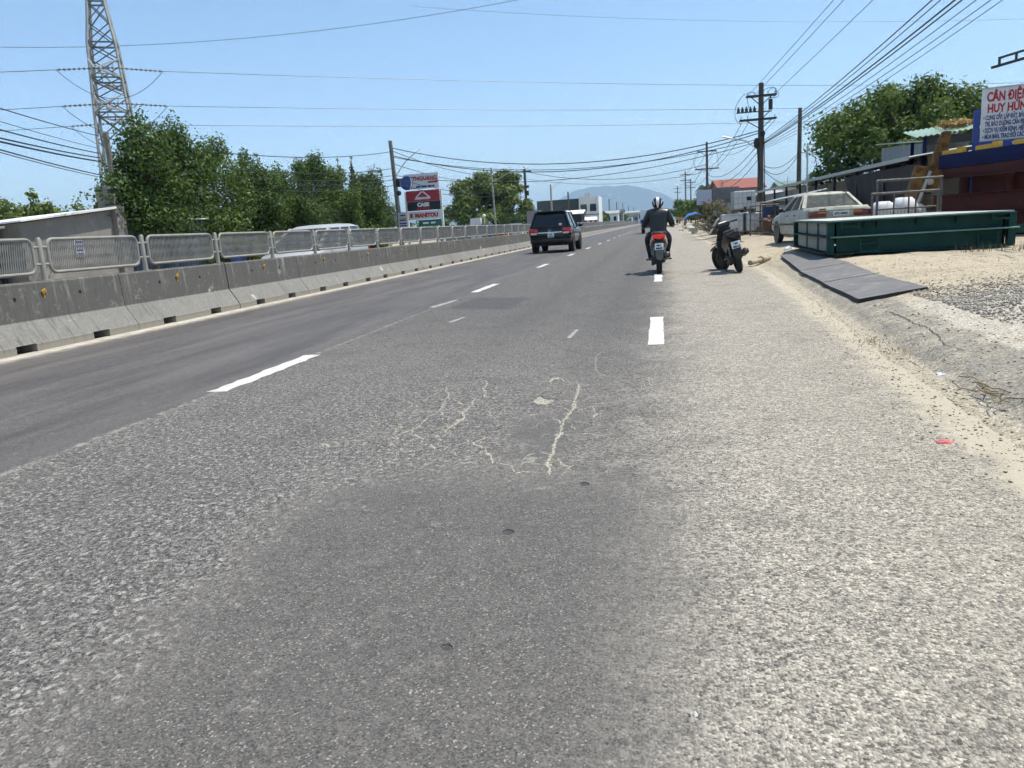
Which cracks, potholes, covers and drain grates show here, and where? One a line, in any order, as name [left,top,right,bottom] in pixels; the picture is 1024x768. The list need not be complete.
crack [319,352,716,517]
crack [886,311,970,351]
